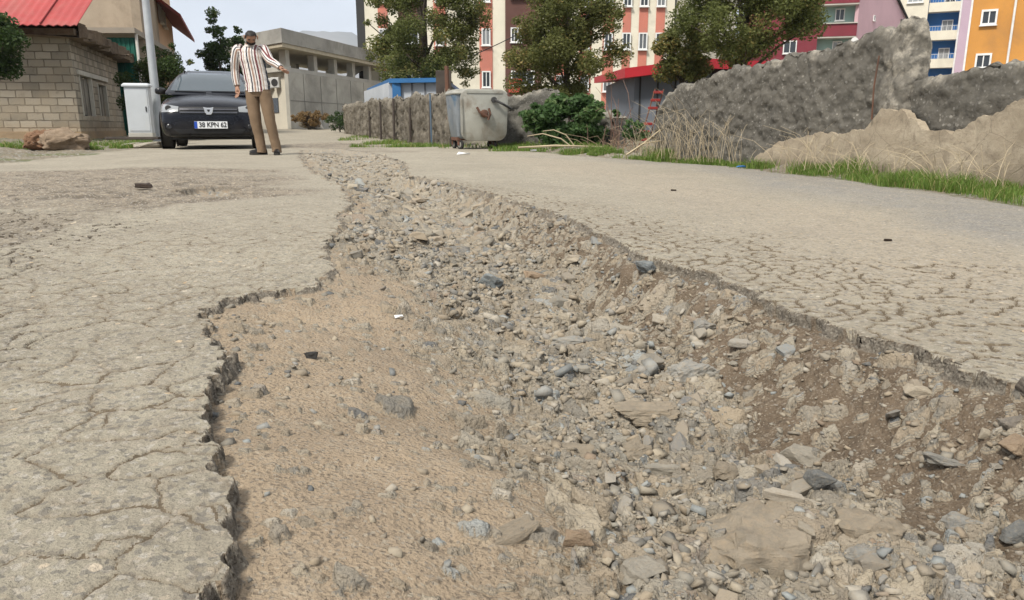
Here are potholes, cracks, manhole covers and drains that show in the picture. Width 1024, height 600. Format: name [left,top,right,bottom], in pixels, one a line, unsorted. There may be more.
pothole [195,149,1024,600]
crack [454,180,1024,374]
crack [0,208,182,369]
pothole [169,185,264,197]
